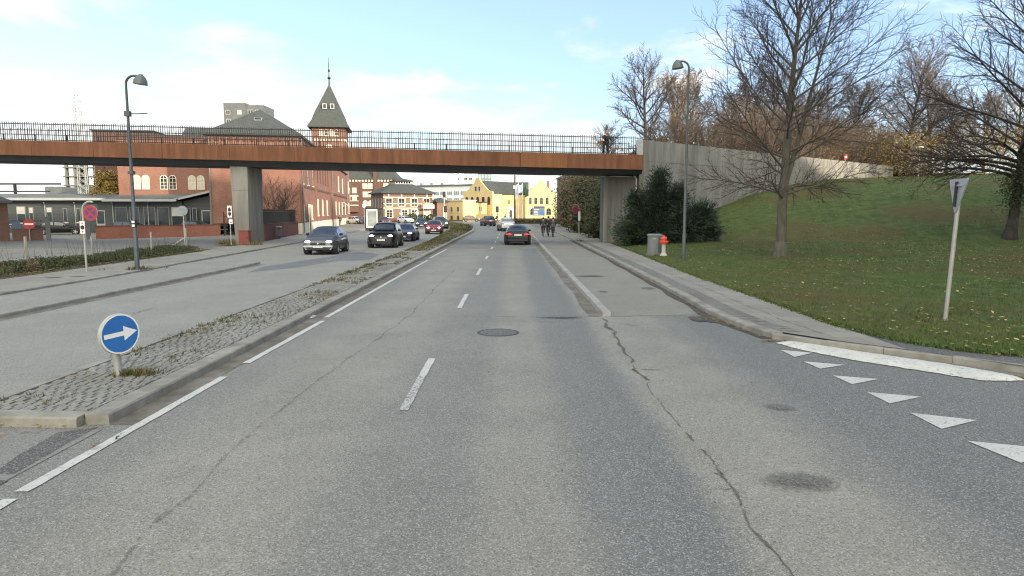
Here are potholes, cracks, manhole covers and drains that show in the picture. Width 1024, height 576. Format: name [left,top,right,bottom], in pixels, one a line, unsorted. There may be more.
crack [409,316,796,576]
